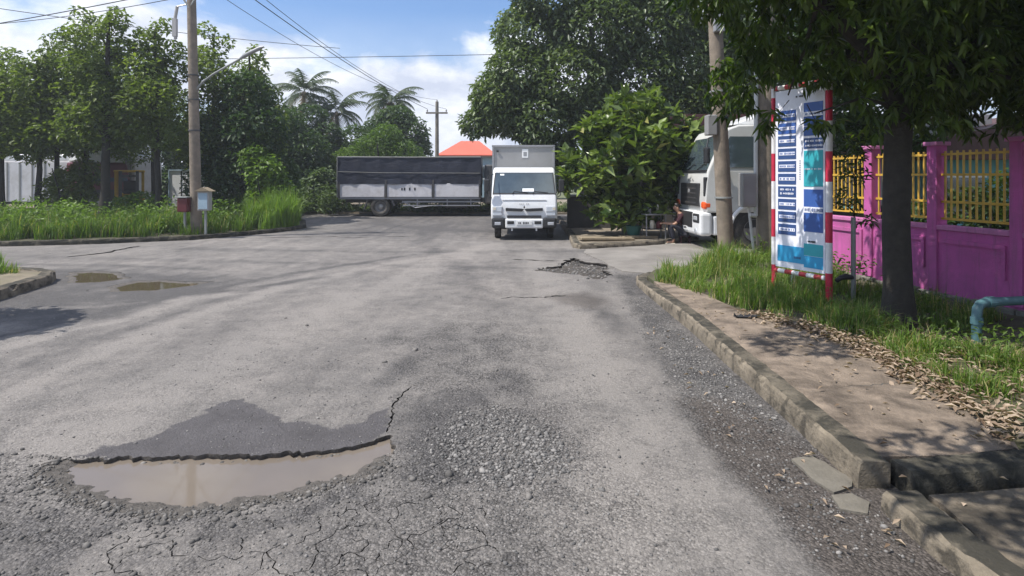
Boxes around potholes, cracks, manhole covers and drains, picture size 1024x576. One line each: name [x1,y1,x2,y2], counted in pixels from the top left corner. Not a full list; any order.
crack [386,386,412,432]
pothole [535,258,612,279]
crack [67,246,139,257]
pothole [65,271,131,283]
pothole [34,435,396,521]
crack [92,492,499,576]
pothole [107,280,212,292]
